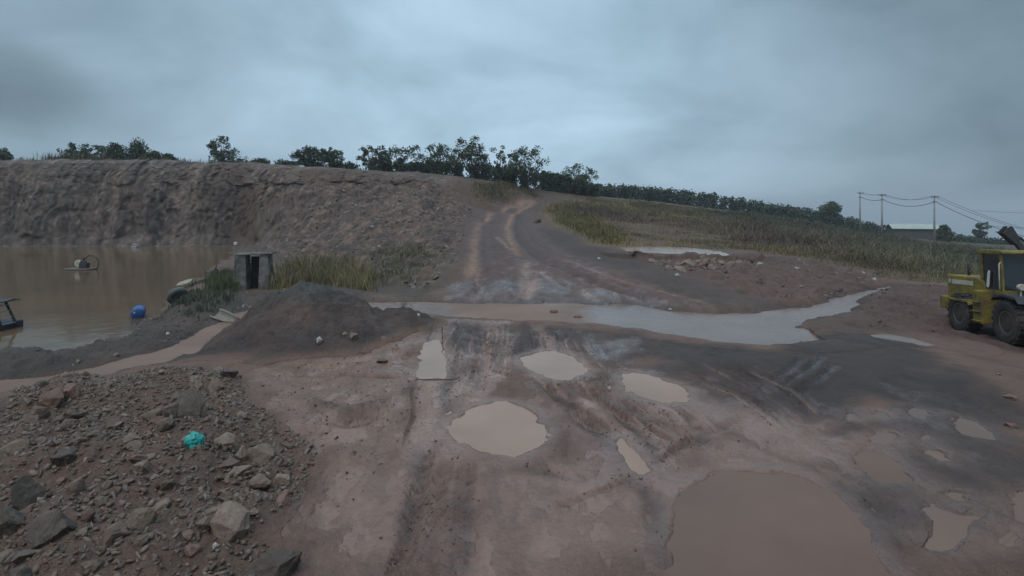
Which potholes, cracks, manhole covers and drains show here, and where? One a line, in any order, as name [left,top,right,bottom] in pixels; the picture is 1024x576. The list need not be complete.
pothole [933,411,1014,446]
pothole [891,436,968,468]
pothole [604,431,663,483]
pothole [607,368,703,407]
pothole [431,396,565,463]
pothole [512,348,599,383]
pothole [835,442,934,494]
pothole [645,462,917,576]
pothole [898,493,1015,560]
